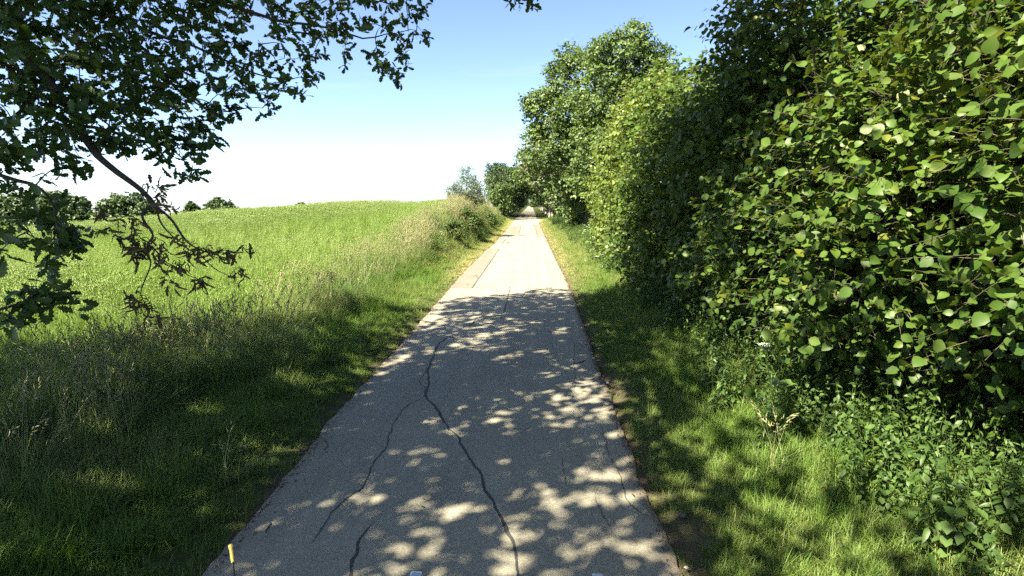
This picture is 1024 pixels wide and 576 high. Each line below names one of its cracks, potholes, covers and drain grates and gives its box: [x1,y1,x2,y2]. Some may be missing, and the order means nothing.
crack [595,427,653,535]
